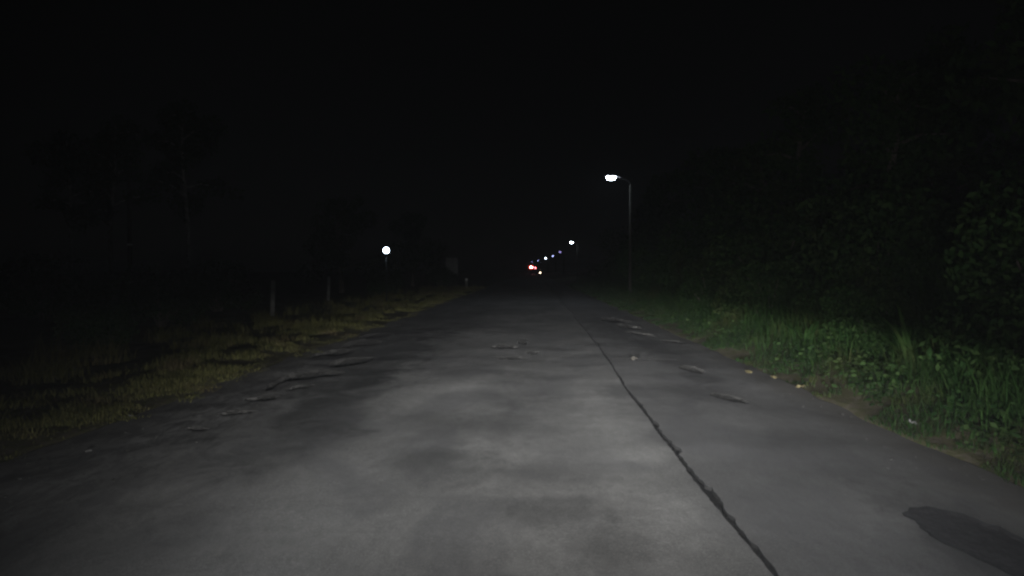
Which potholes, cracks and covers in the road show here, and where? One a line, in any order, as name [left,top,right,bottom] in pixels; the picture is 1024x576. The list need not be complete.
crack [548,288,778,576]
pothole [709,393,750,404]
pothole [265,369,345,391]
pothole [679,365,705,374]
pothole [244,393,281,402]
